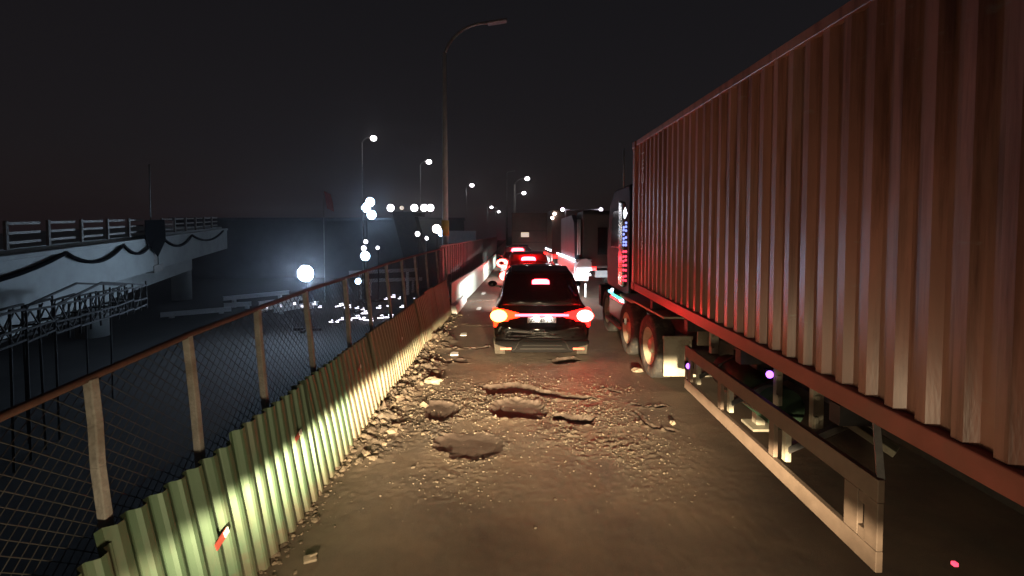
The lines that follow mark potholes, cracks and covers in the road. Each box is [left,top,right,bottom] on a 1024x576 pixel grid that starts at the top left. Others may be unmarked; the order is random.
pothole [432,432,503,461]
pothole [489,396,548,419]
pothole [551,356,580,365]
pothole [552,413,595,425]
pothole [479,382,596,400]
pothole [423,400,463,422]
crack [602,385,676,432]
